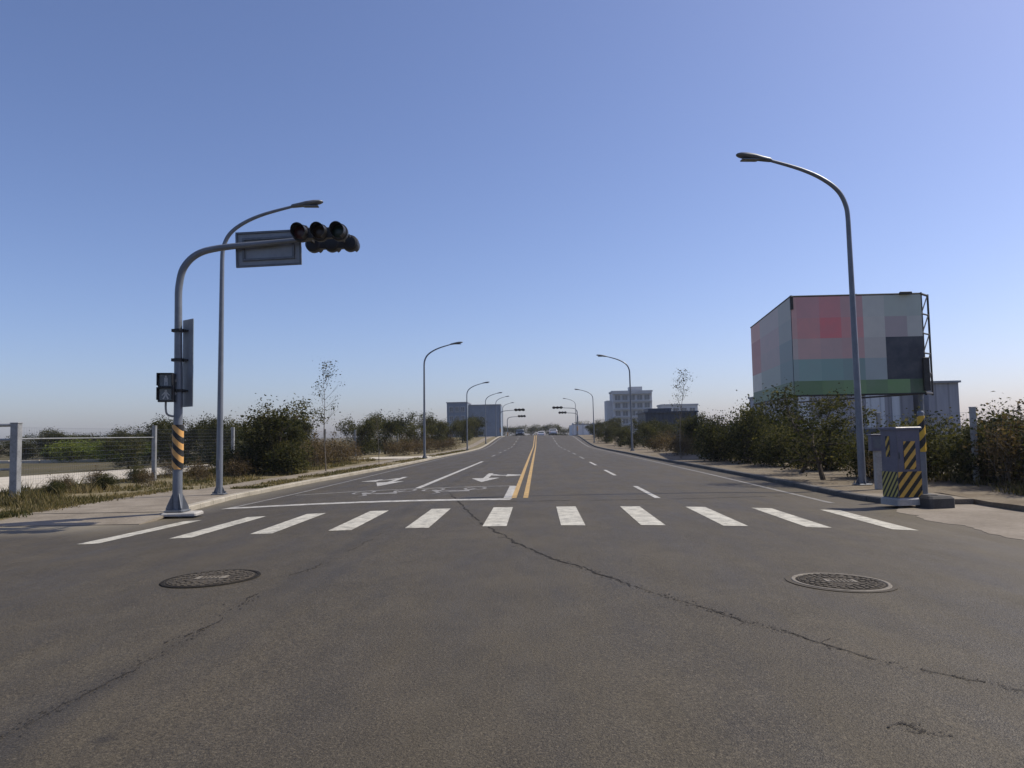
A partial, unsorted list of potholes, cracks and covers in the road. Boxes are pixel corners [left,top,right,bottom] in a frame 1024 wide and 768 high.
manhole cover [159,569,261,588]
crack [451,494,1024,693]
crack [0,522,395,743]
crack [887,721,957,738]
manhole cover [785,572,899,592]
